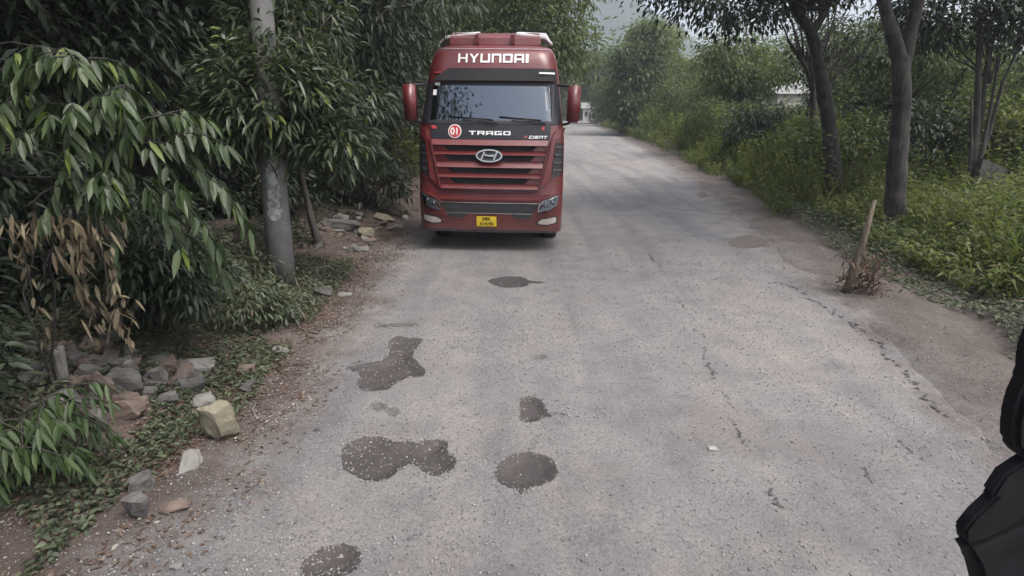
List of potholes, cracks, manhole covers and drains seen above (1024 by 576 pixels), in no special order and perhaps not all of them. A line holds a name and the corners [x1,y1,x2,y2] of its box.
crack [768,266,950,417]
crack [762,477,786,508]
